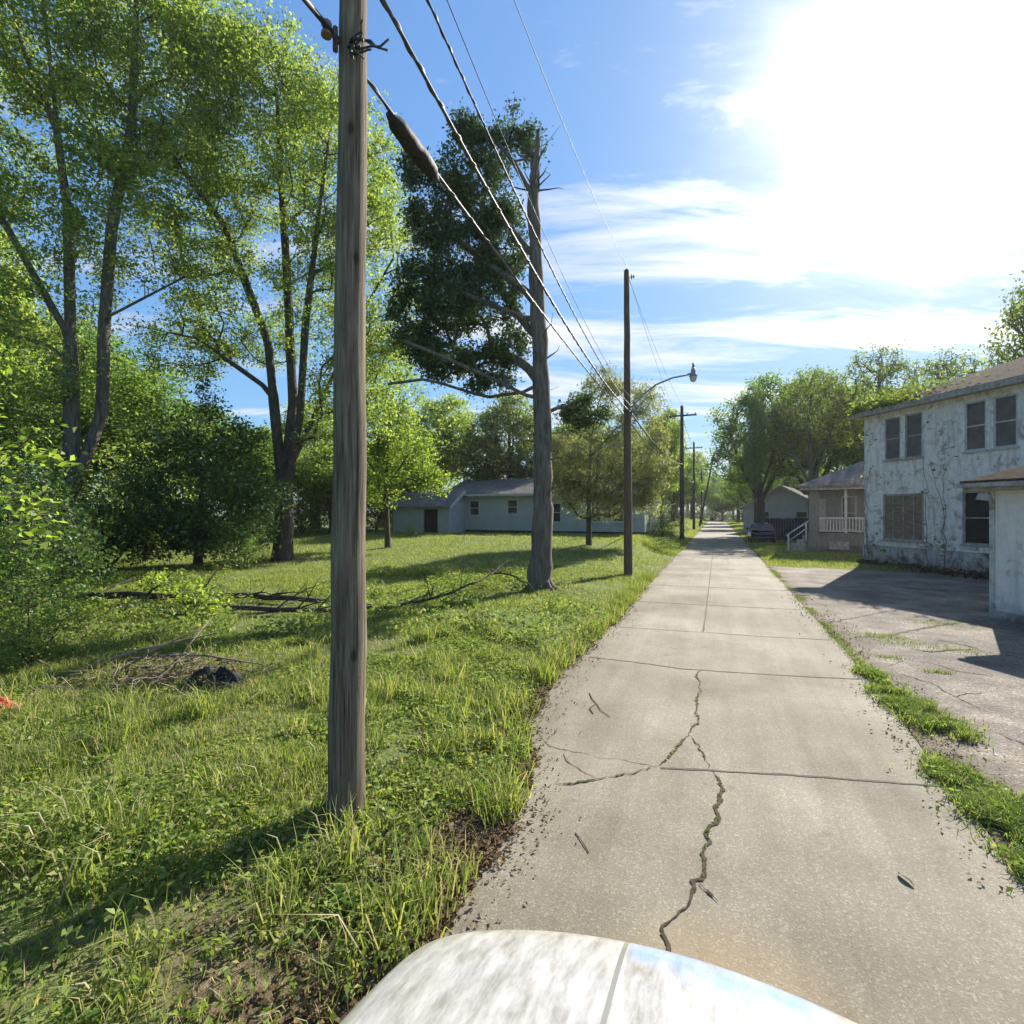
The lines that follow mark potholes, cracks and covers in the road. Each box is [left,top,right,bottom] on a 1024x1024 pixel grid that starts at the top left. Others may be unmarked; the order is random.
crack [537,670,727,952]
crack [826,609,1024,744]
